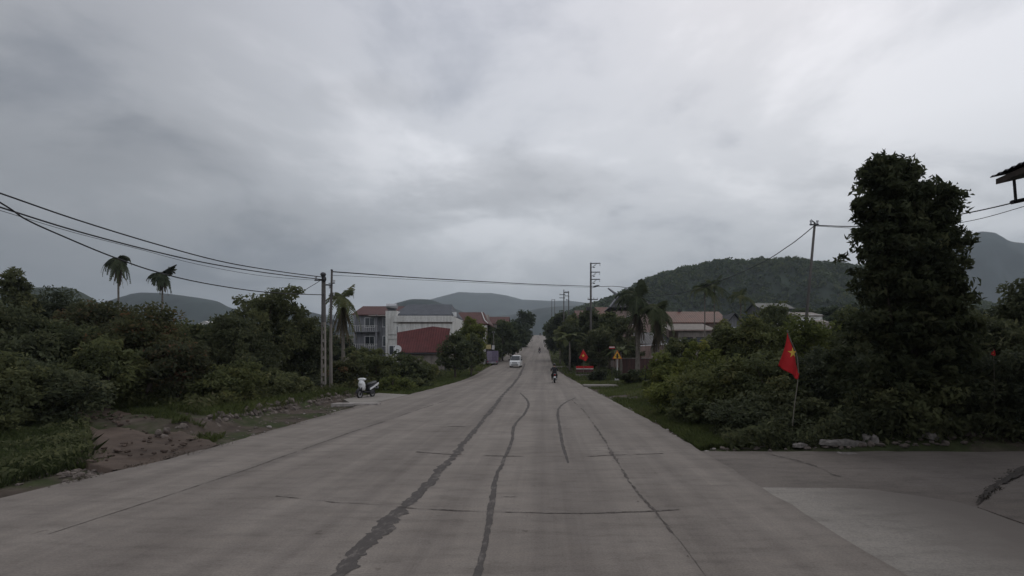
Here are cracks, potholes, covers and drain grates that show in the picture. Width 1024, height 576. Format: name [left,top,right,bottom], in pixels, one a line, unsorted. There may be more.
crack [766,453,839,476]
